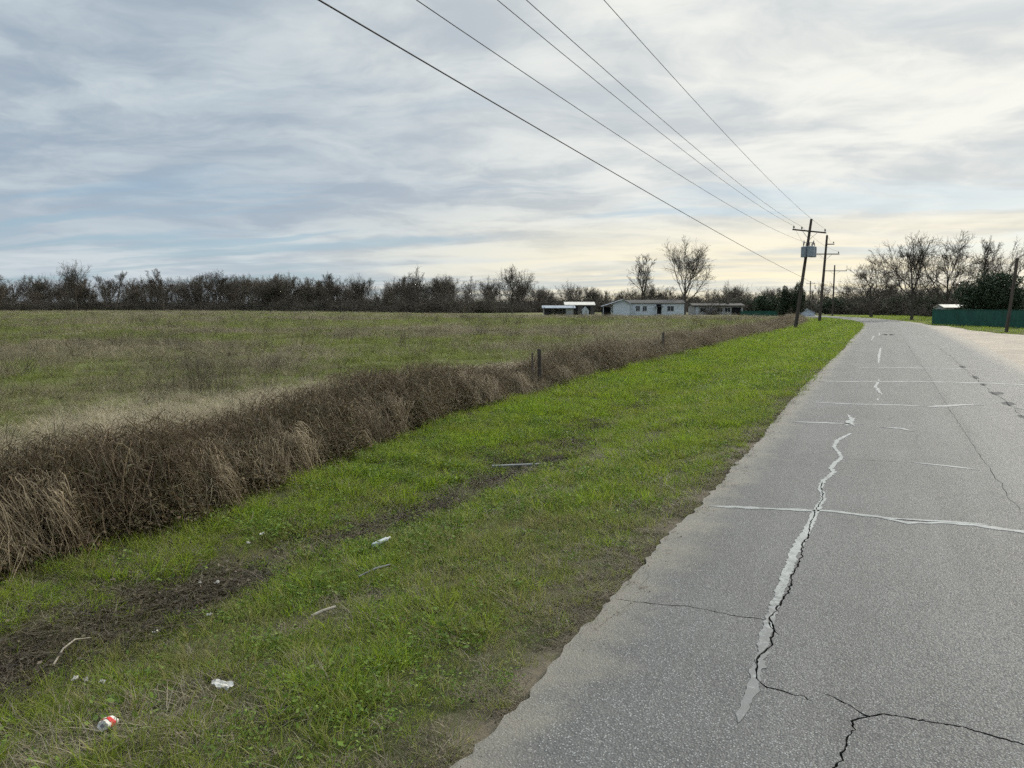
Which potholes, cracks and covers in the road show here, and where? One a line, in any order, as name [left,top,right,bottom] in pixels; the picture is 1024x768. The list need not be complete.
crack [613,433,1024,768]
